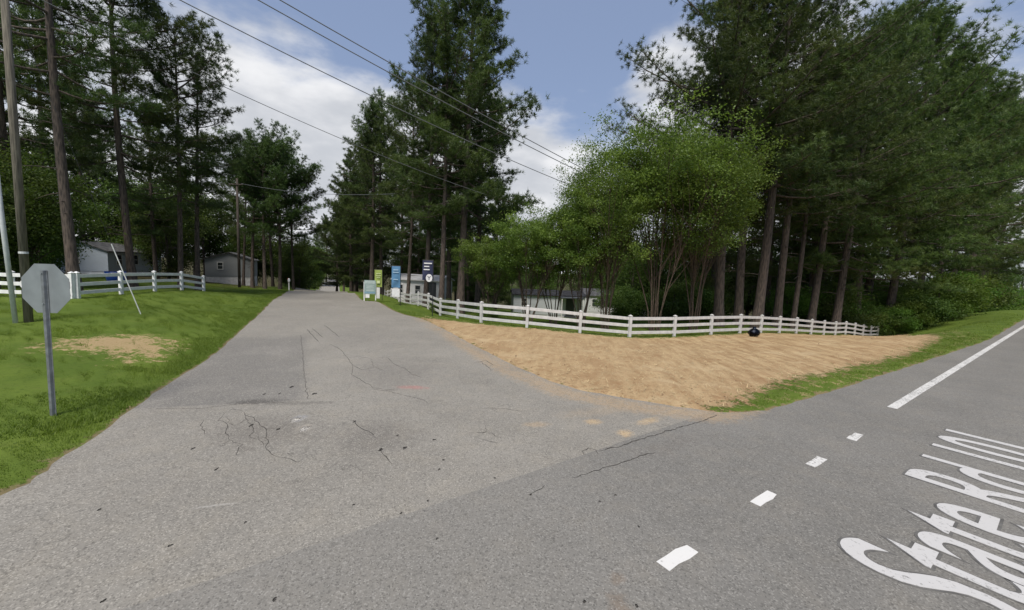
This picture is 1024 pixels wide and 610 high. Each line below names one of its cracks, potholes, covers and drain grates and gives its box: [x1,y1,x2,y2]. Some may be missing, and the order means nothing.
crack [530,415,717,495]
crack [157,326,425,462]
